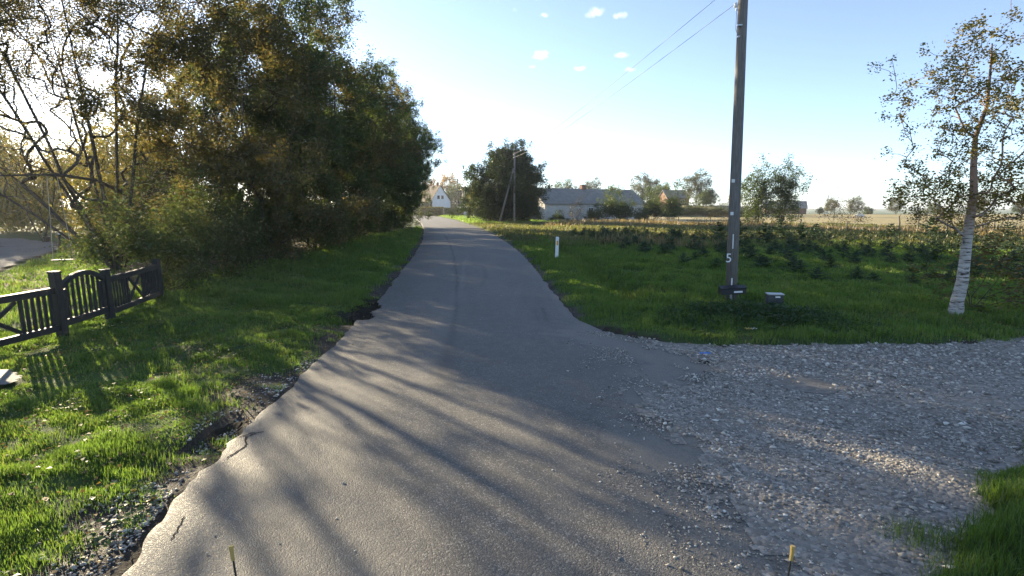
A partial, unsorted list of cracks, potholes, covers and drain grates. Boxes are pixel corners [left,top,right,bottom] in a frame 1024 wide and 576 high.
crack [226,431,264,459]
